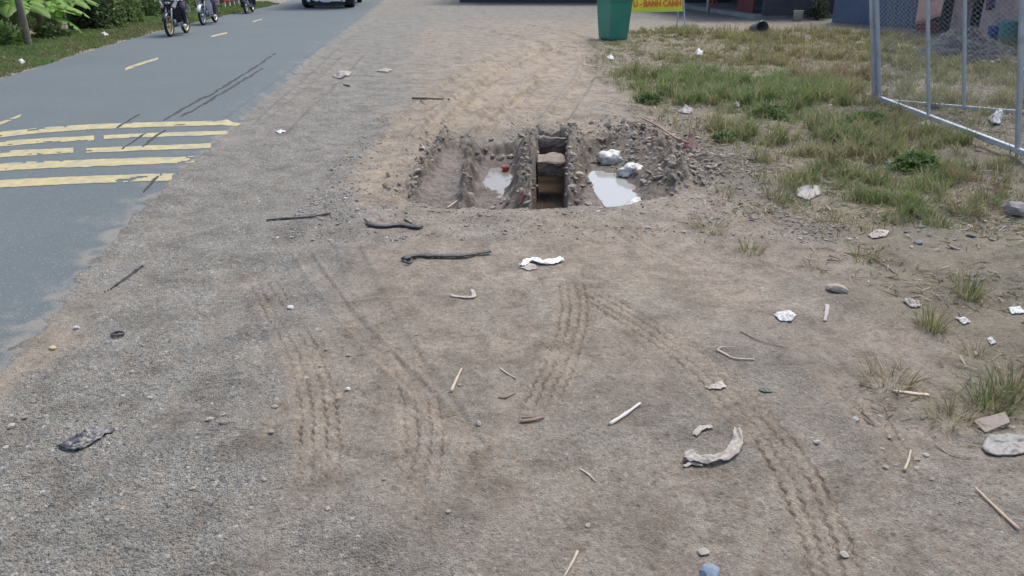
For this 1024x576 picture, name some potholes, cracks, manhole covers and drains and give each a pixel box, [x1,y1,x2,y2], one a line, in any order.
pothole [402,121,693,210]
